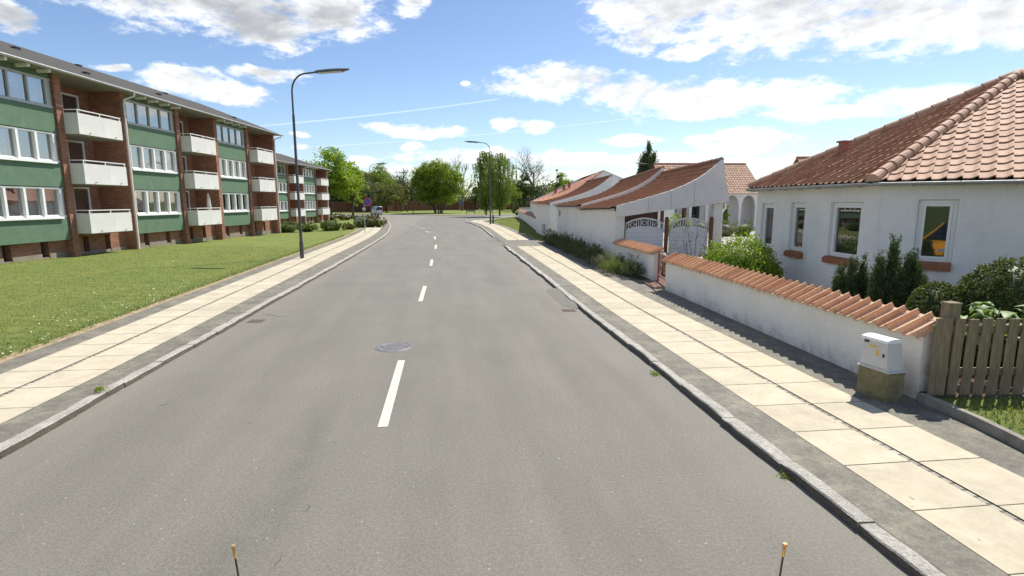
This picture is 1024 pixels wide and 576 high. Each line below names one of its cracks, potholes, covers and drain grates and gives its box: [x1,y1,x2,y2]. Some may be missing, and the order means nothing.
manhole cover [375,342,413,352]
